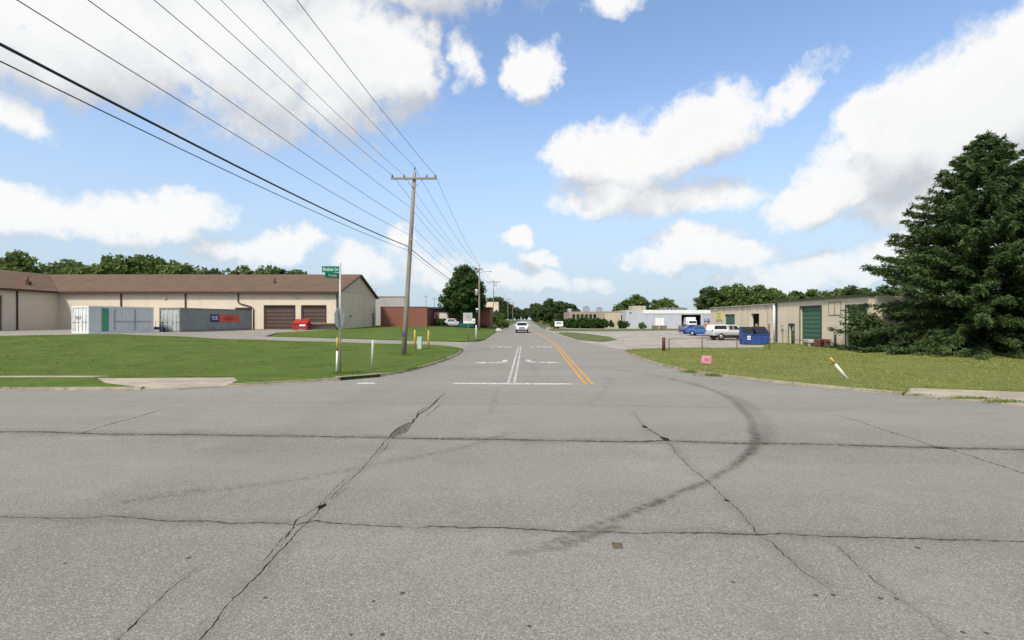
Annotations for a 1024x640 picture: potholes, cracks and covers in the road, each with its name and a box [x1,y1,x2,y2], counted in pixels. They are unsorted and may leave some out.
pothole [389,422,412,438]
crack [0,395,1024,640]
